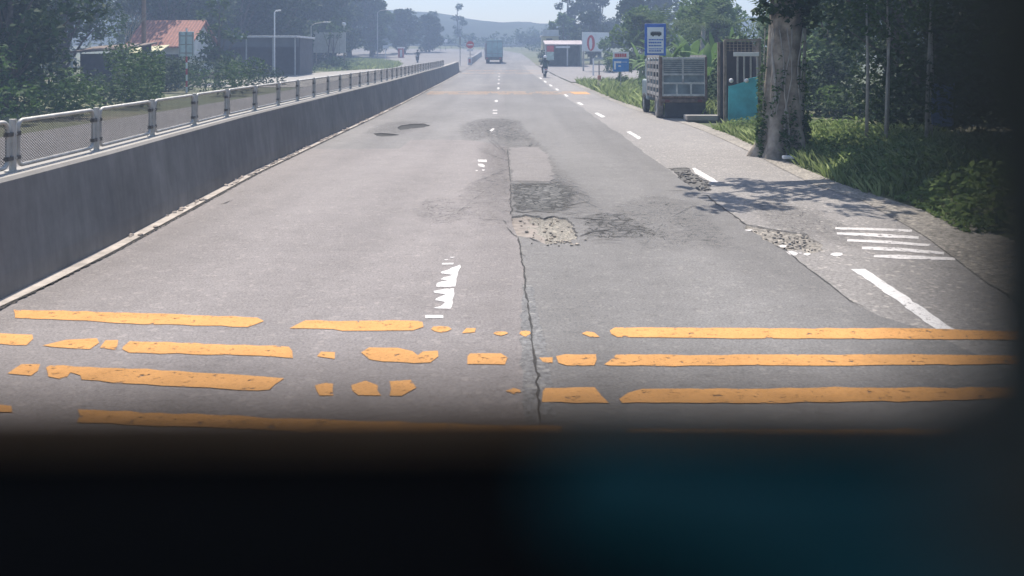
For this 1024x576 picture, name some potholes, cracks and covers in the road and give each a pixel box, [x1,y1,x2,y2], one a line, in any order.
pothole [668,168,711,192]
crack [497,183,651,382]
pothole [512,214,587,246]
pothole [744,224,823,254]
